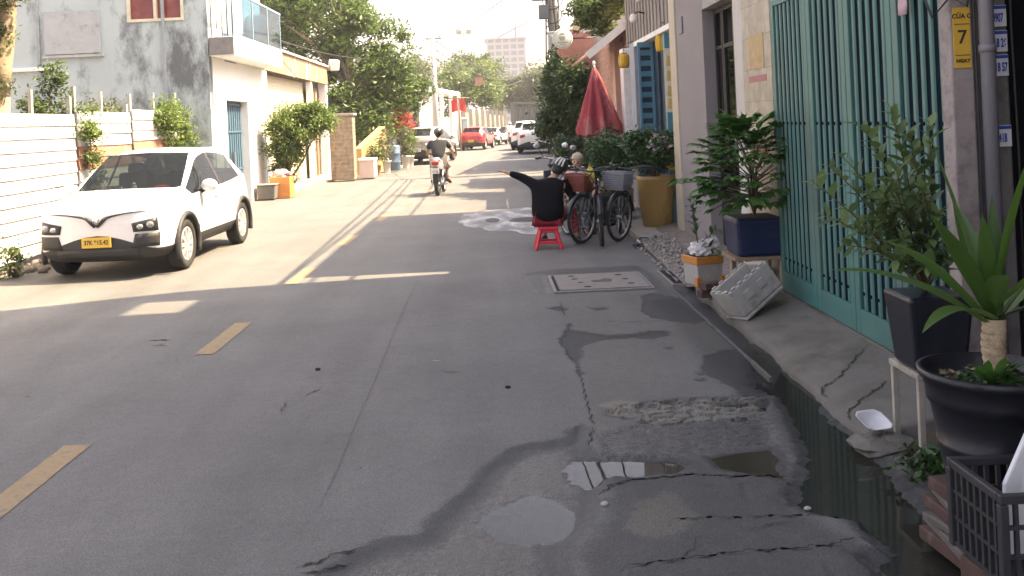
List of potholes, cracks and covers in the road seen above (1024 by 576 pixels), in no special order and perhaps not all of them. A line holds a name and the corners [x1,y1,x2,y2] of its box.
crack [580,378,595,445]
manhole cover [548,271,655,294]
pothole [606,394,772,426]
crack [599,473,787,494]
crack [821,348,886,419]
crack [632,513,878,565]
drain grate [657,269,690,287]
